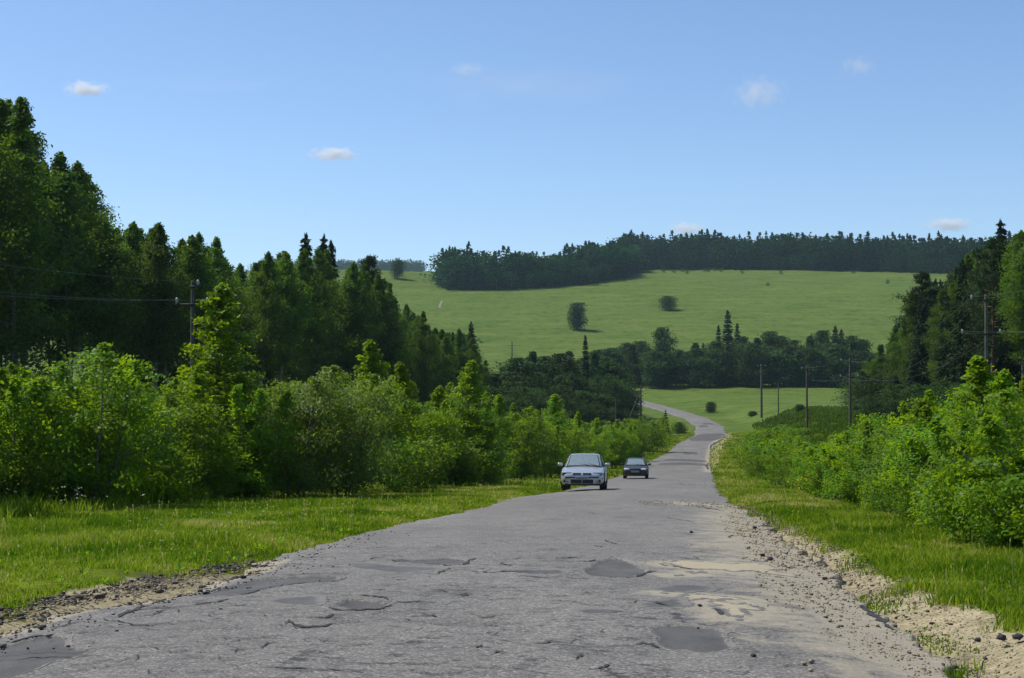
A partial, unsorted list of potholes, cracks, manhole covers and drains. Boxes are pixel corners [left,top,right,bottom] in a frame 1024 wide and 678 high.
pothole [0,633,96,678]
pothole [330,597,398,609]
pothole [645,623,738,654]
pothole [390,557,472,565]
crack [0,540,831,678]
pothole [580,557,650,578]
